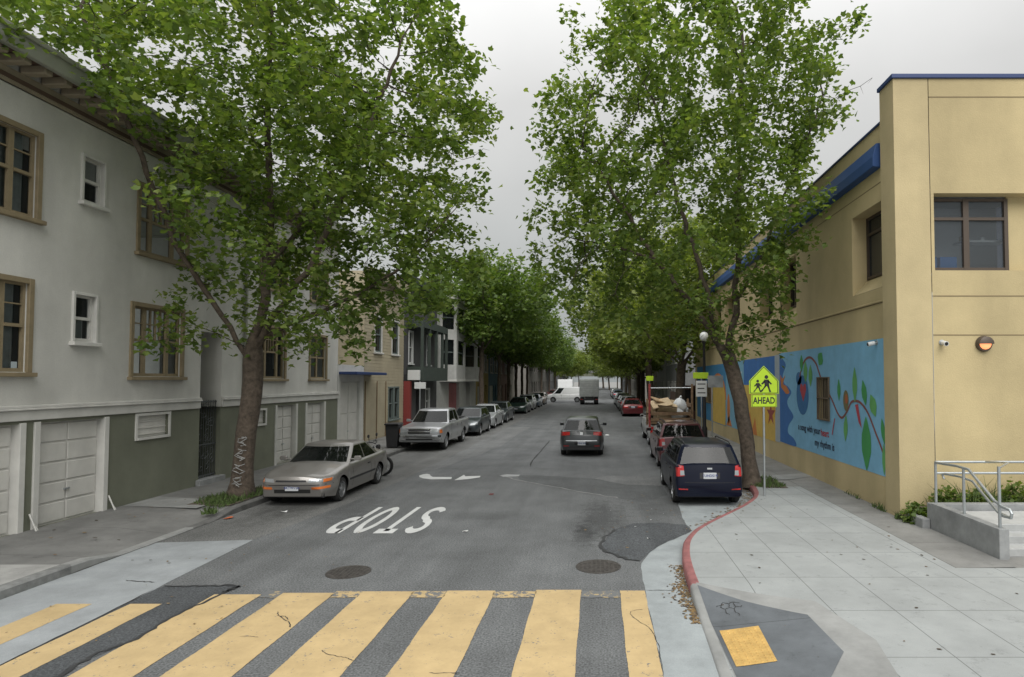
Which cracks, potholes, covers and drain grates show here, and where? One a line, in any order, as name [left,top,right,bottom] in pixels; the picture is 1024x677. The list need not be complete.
manhole cover [576,559,621,574]
manhole cover [325,565,371,579]
crack [500,441,618,498]
